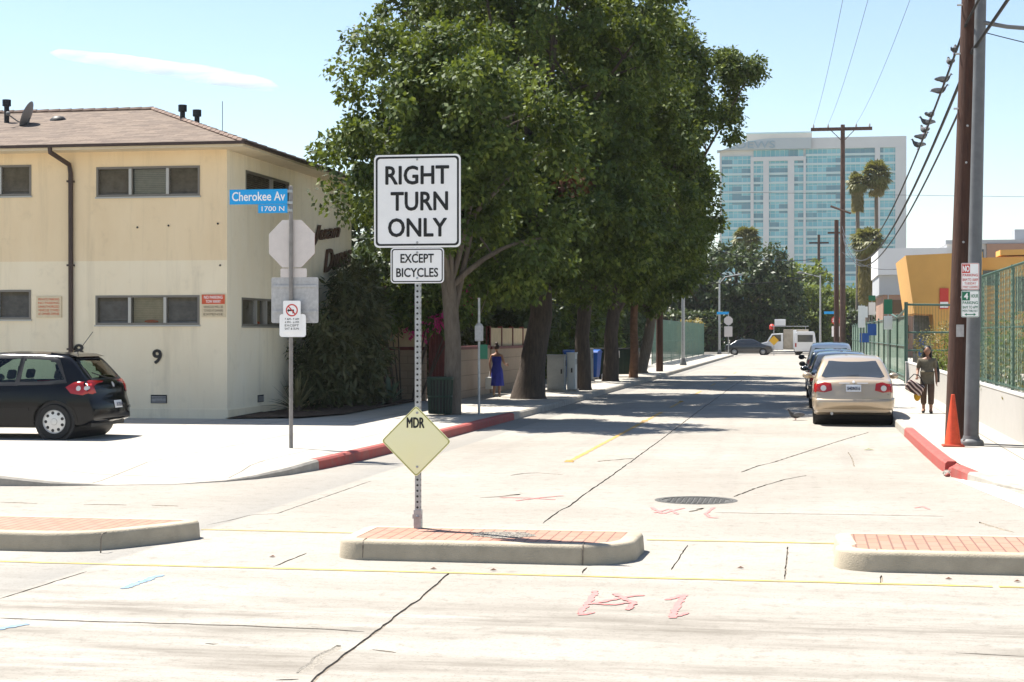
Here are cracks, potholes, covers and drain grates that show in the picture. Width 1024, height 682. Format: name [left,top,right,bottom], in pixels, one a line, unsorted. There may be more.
manhole cover [655,496,738,504]
crack [4,573,450,682]
crack [689,432,907,516]
